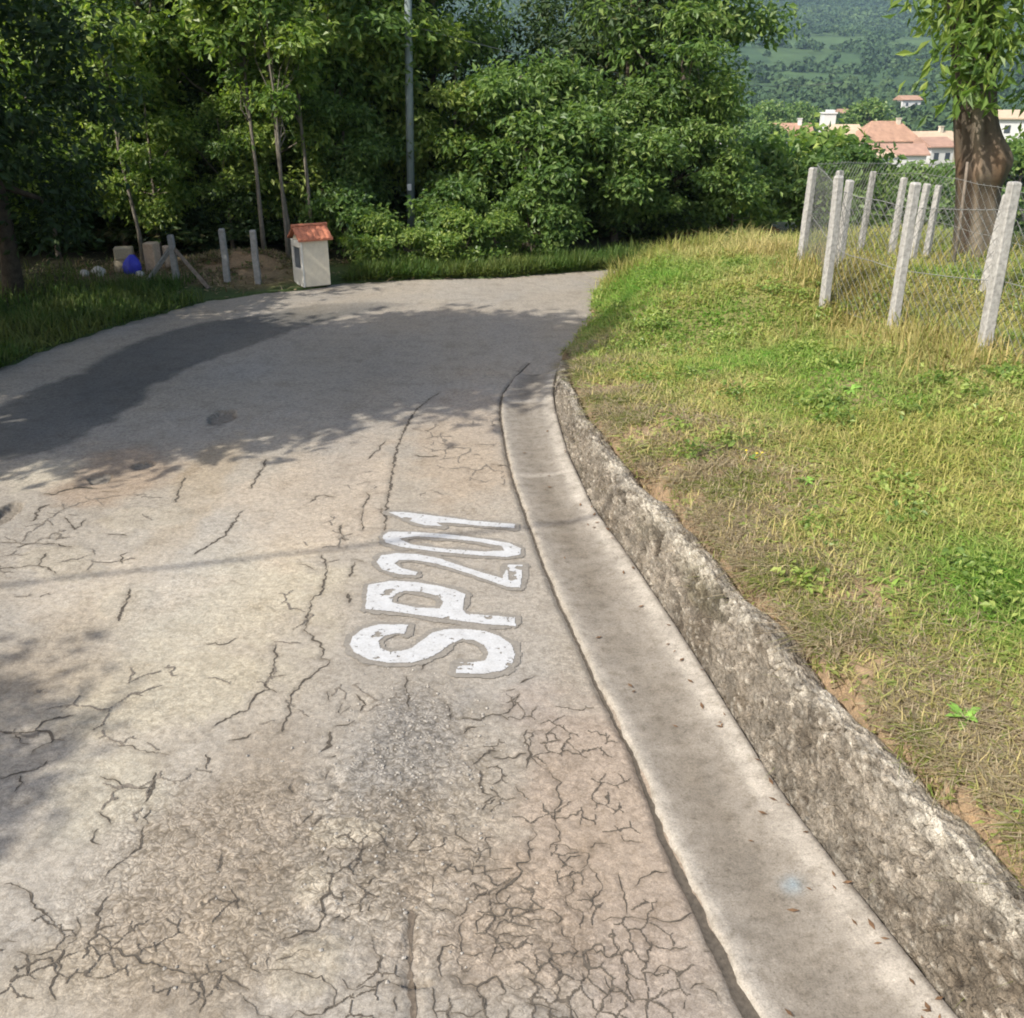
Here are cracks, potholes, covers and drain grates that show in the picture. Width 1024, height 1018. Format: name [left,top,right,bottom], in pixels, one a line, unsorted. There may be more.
pothole [208,411,237,426]
crack [0,363,760,1018]
